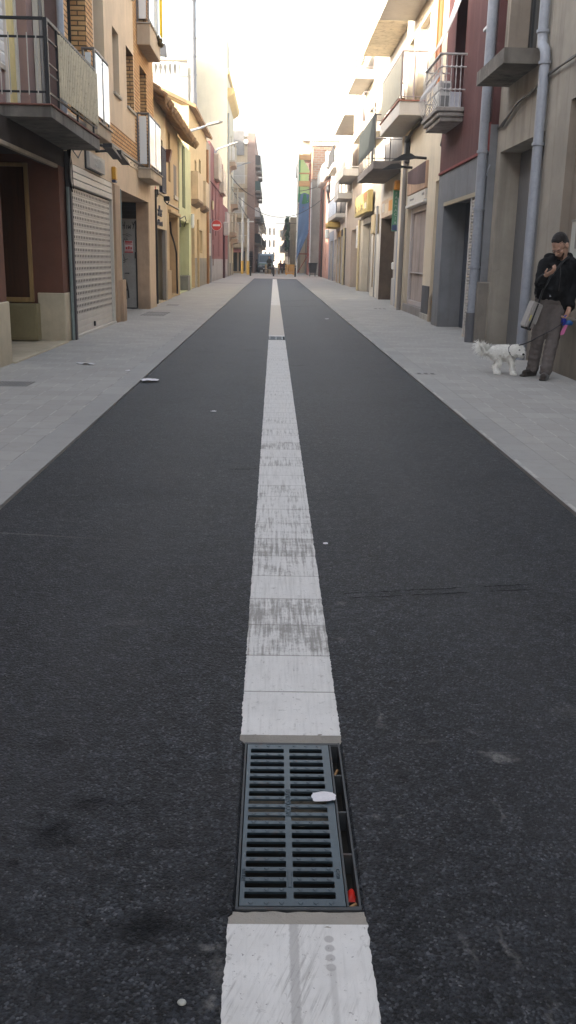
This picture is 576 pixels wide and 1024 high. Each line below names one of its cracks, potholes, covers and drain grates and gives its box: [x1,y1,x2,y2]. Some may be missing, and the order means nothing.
crack [323,584,531,599]
drain grate [235,742,362,913]
